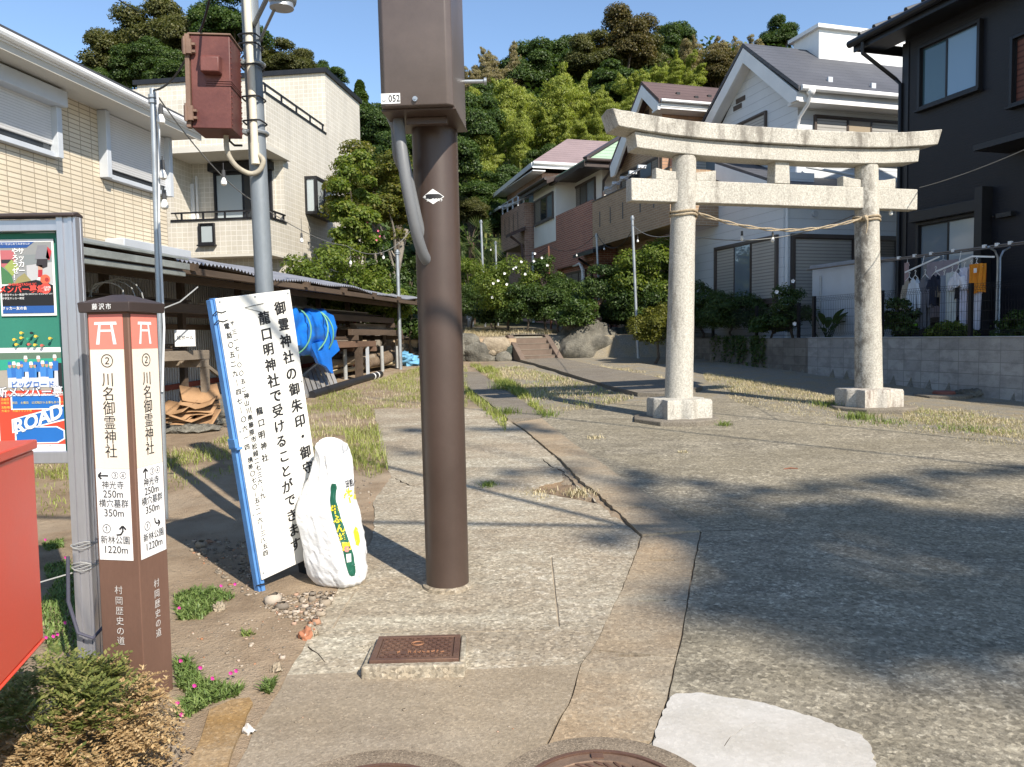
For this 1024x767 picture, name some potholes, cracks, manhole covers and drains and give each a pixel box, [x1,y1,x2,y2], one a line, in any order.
manhole cover [506,737,696,767]
manhole cover [361,634,467,679]
pothole [534,469,594,503]
manhole cover [314,750,464,767]
